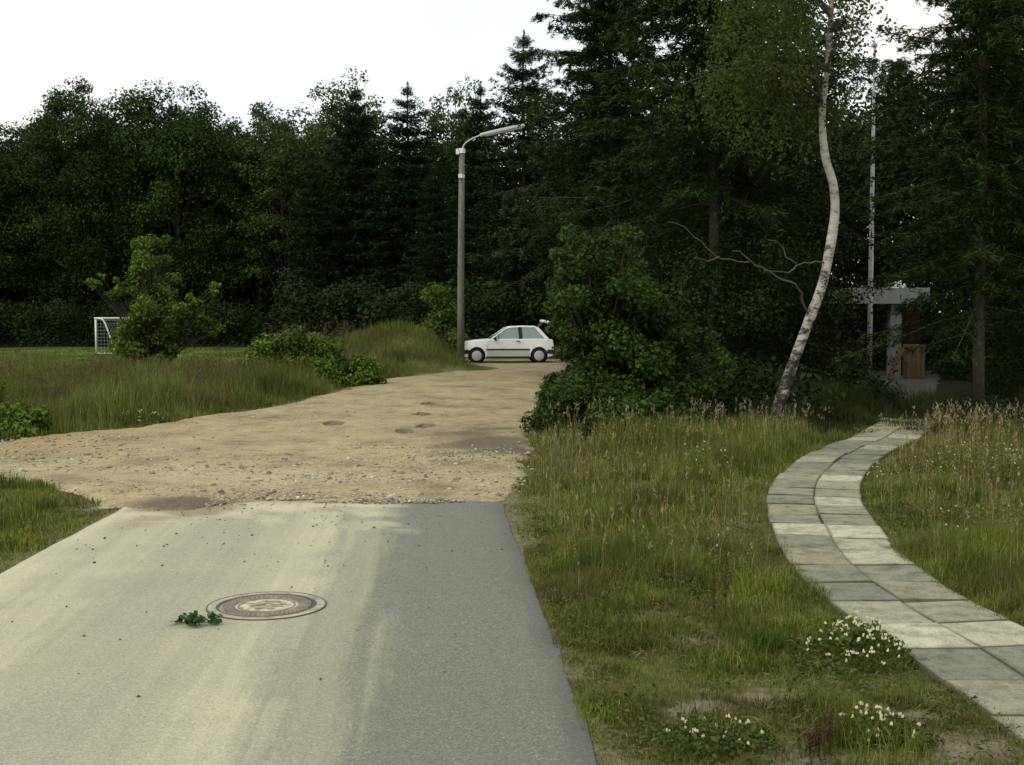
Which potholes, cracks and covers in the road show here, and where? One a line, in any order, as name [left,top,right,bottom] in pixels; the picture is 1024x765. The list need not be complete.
manhole cover [206,591,327,621]
